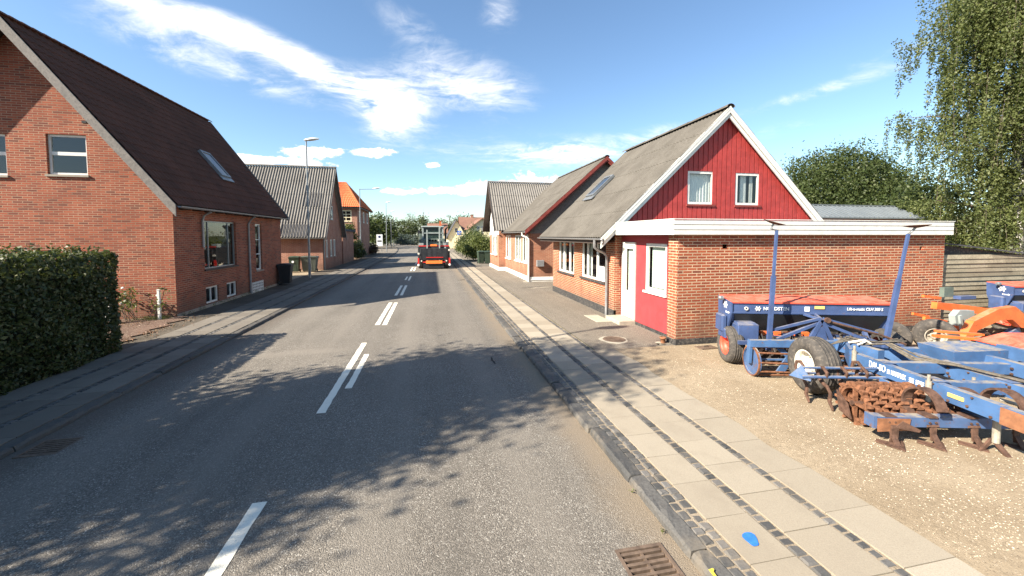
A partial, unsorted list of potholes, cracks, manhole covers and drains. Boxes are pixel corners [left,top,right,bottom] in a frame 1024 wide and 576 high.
drain grate [614,542,685,576]
manhole cover [599,336,628,344]
drain grate [12,437,84,459]
